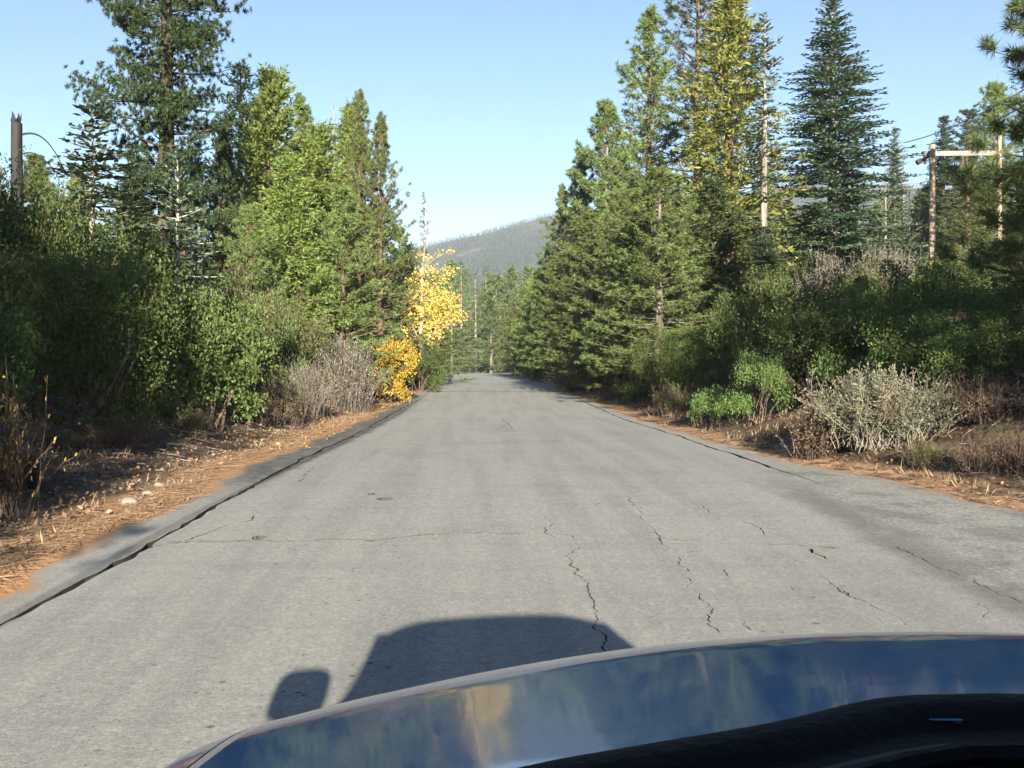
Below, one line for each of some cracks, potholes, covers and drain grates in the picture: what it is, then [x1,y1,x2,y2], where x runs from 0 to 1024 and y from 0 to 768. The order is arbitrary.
crack [897,547,1022,617]
crack [596,497,719,632]
crack [151,512,520,548]
crack [543,515,608,652]
crack [821,576,906,625]
